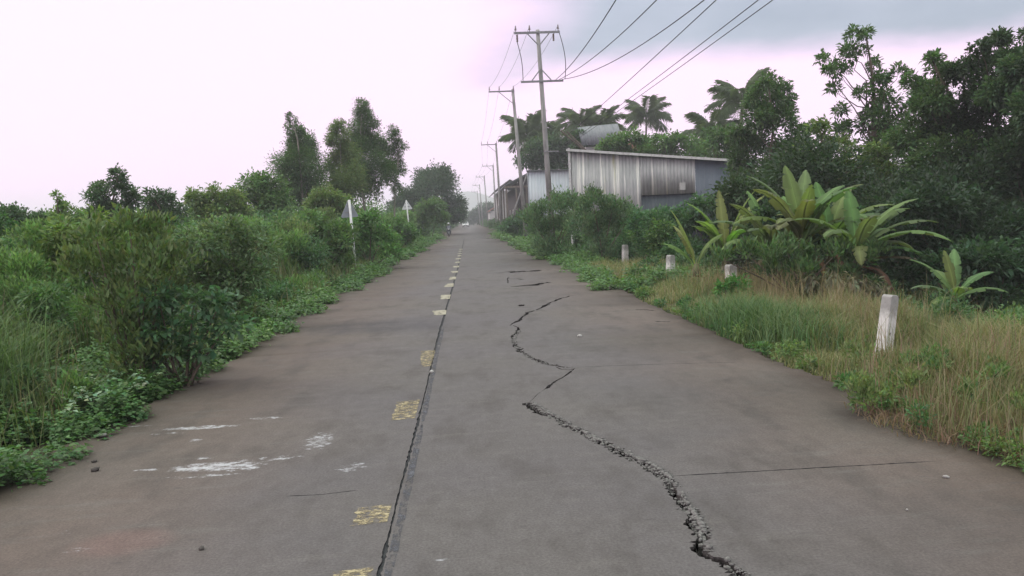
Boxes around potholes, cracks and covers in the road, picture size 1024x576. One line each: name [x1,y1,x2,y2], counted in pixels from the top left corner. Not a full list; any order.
crack [486,253,750,576]
